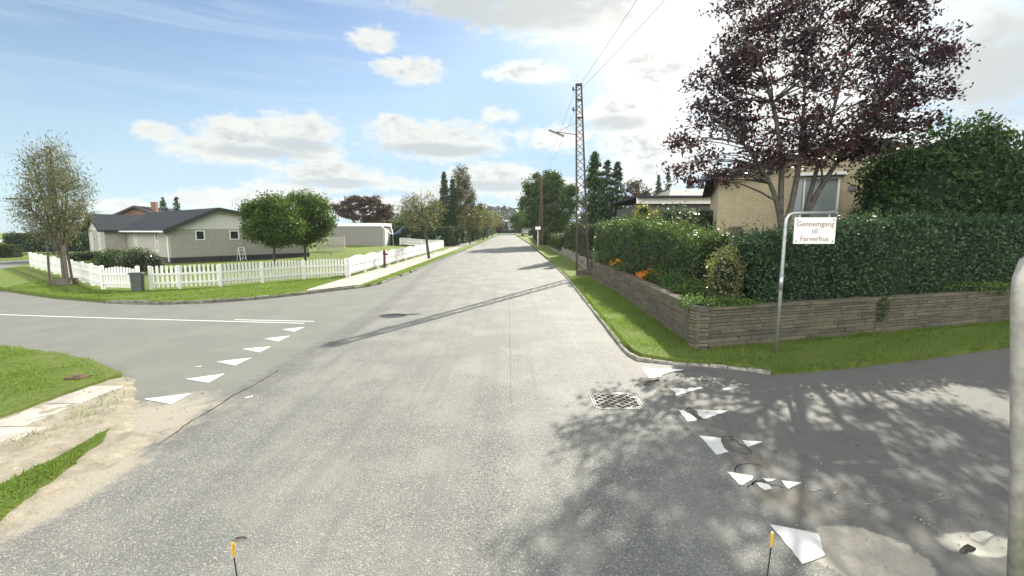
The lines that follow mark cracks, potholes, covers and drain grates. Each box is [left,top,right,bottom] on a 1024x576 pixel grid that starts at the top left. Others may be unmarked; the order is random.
pothole [721,435,752,456]
crack [734,463,784,488]
drain grate [589,393,645,410]
pothole [959,544,976,555]
